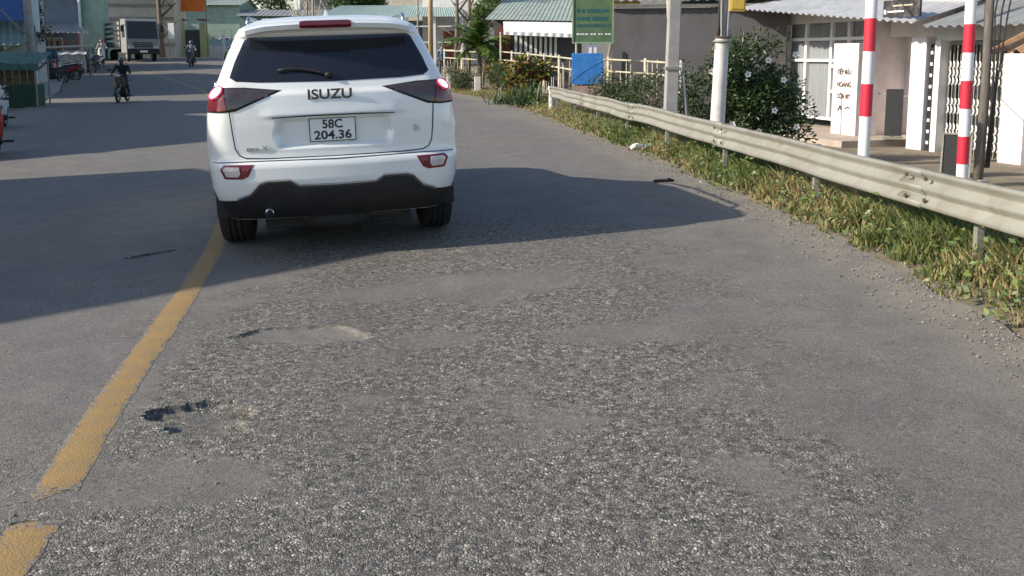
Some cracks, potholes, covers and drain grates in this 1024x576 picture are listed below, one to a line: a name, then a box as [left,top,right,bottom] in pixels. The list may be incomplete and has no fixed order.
pothole [140,399,259,437]
